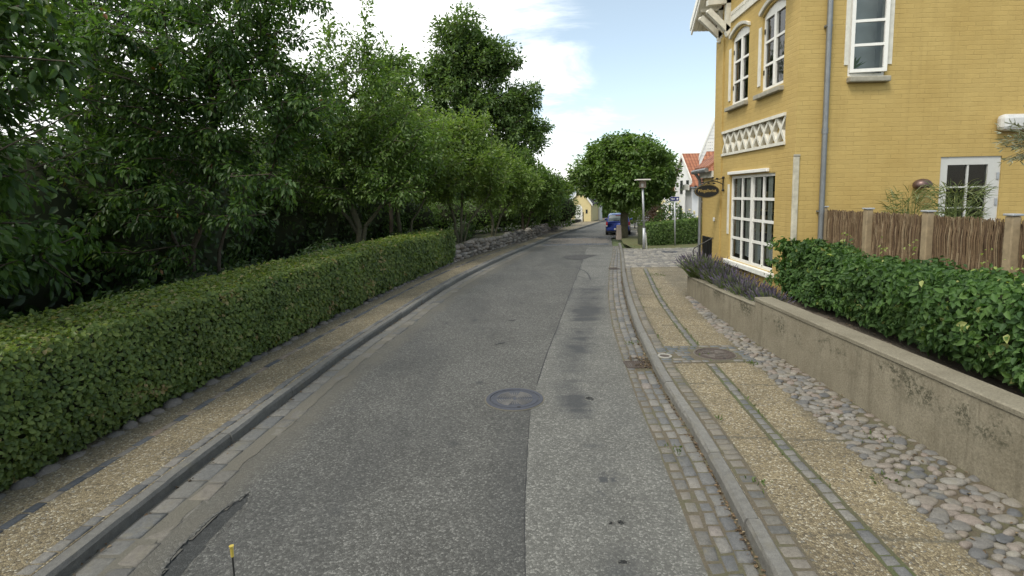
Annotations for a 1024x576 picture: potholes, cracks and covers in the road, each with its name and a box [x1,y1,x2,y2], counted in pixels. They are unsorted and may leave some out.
manhole cover [693,348,737,361]
manhole cover [485,388,545,411]
